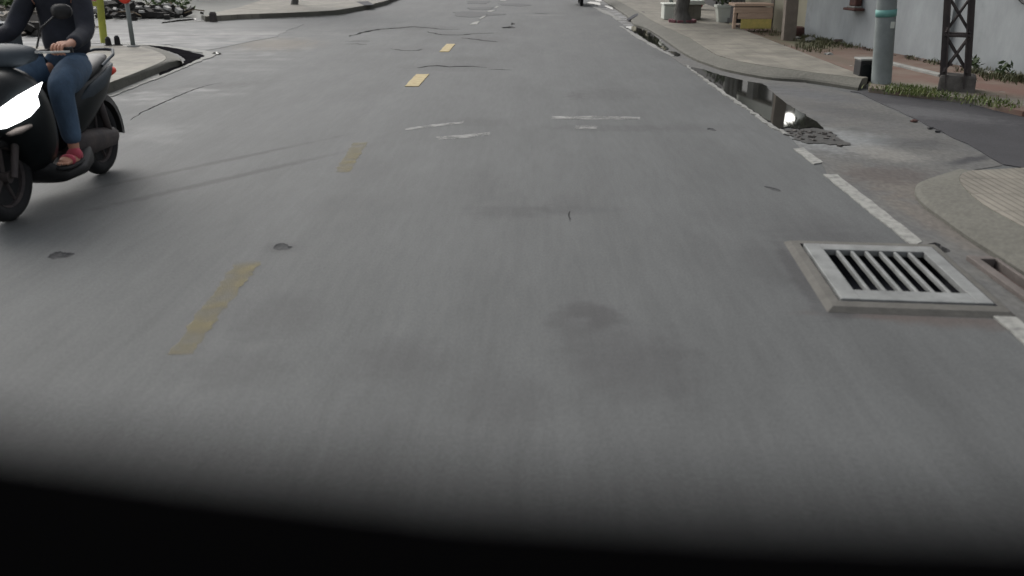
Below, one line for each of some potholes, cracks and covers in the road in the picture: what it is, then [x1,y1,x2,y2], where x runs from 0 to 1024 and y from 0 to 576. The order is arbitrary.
drain grate [784,240,1018,318]
pothole [47,251,74,259]
crack [132,83,217,119]
crack [349,23,515,70]
